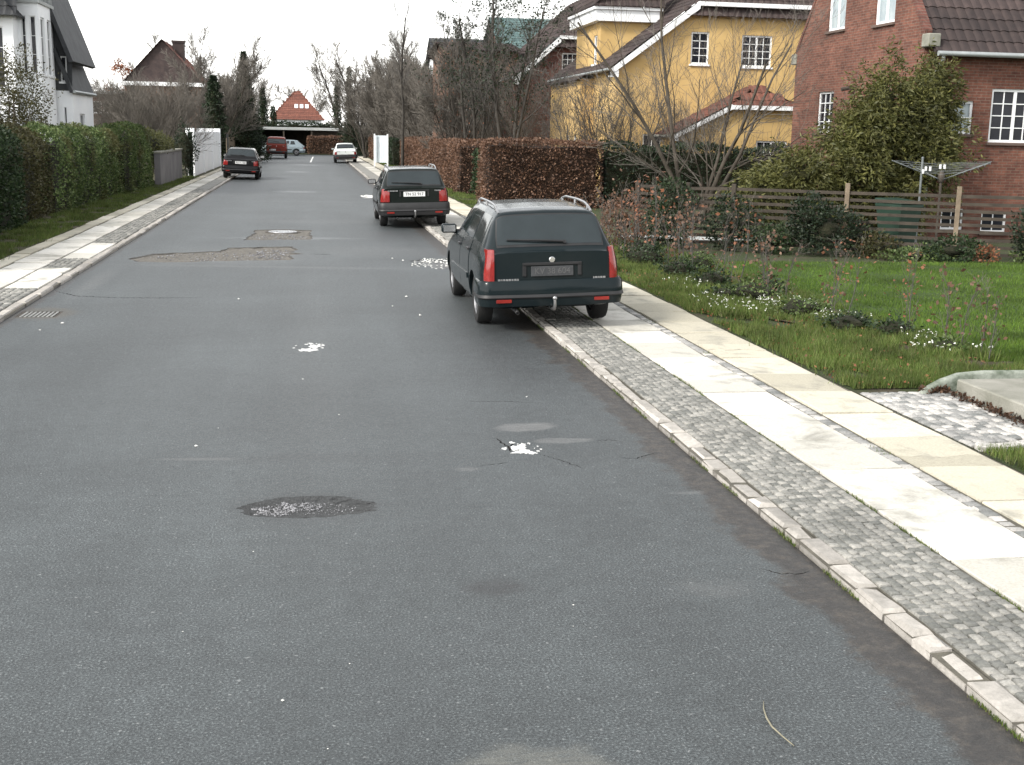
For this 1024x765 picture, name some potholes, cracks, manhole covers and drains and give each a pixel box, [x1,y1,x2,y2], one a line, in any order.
pothole [236,496,377,518]
crack [482,438,581,468]
